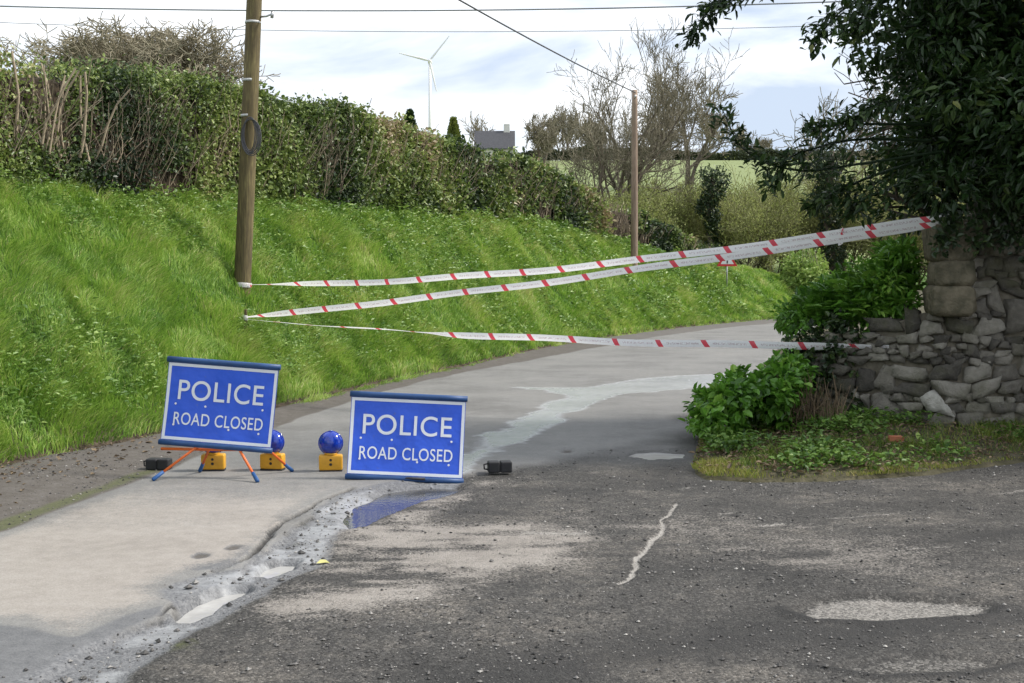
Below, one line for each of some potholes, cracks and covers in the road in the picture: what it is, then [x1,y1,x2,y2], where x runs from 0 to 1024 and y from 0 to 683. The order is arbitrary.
pothole [243,557,310,581]
crack [611,502,683,585]
pothole [160,582,265,627]
